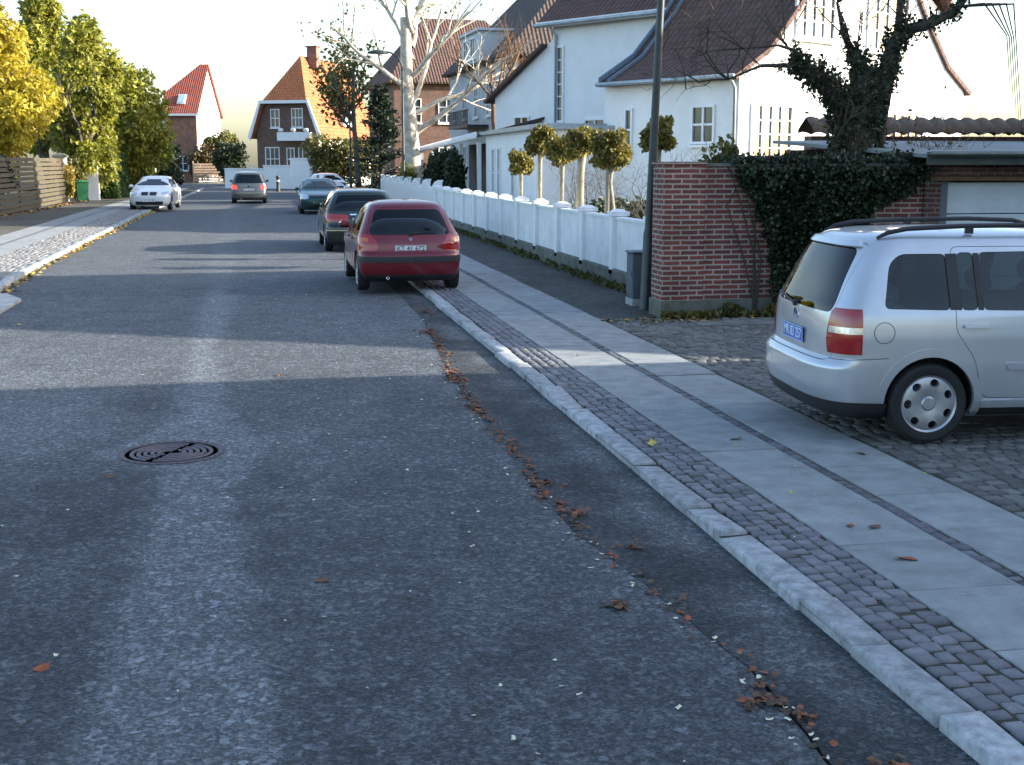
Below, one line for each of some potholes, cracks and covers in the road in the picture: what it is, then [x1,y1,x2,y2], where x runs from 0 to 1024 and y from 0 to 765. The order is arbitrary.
manhole cover [117,440,225,465]
